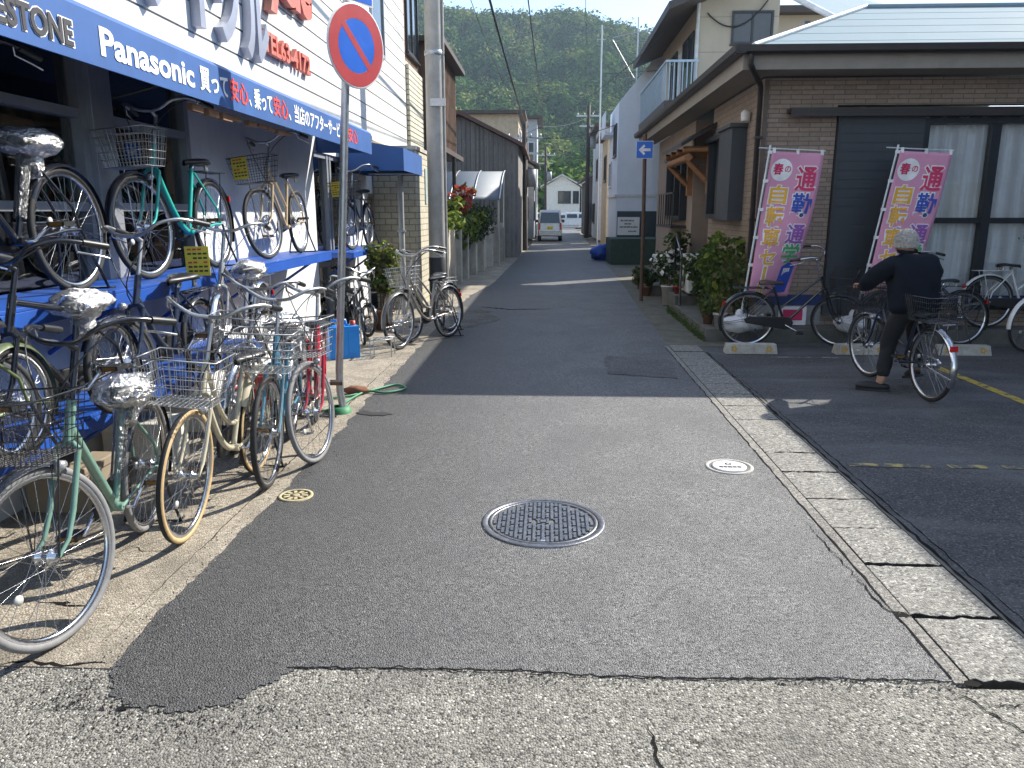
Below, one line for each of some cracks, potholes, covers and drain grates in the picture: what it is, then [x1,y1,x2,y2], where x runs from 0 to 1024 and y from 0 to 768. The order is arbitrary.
crack [647,726,664,768]
utility cover [705,459,754,475]
utility cover [278,489,313,502]
manhole cover [482,499,605,548]
